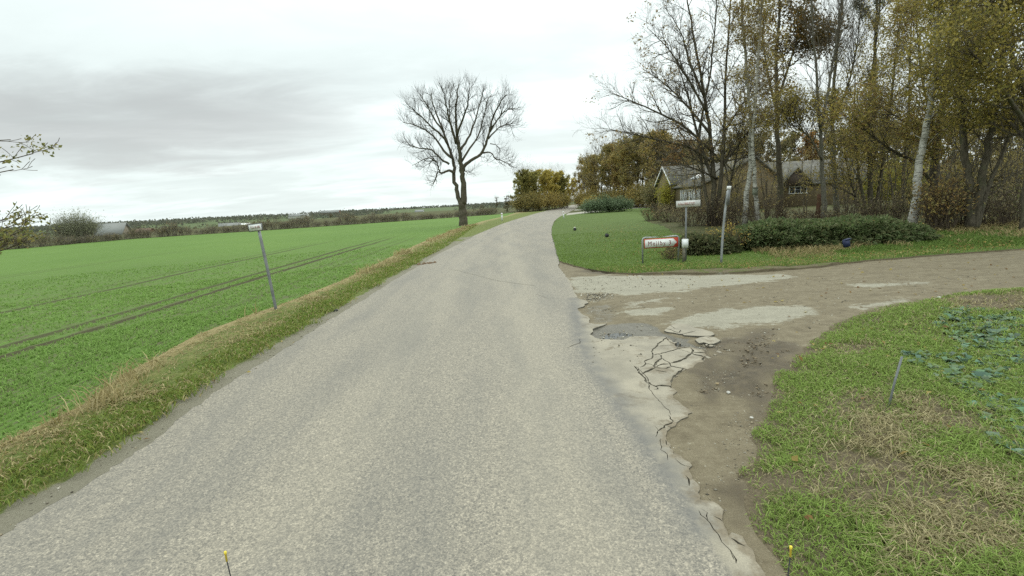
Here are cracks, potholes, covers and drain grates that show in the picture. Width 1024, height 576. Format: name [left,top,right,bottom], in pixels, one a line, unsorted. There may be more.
crack [634,325,705,485]
pothole [590,321,710,350]
crack [699,510,744,562]
